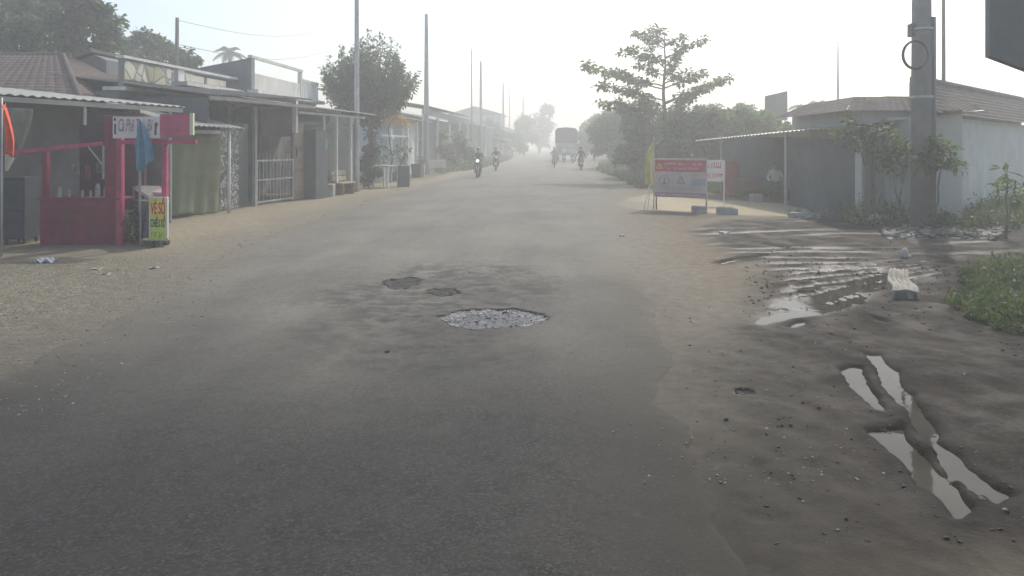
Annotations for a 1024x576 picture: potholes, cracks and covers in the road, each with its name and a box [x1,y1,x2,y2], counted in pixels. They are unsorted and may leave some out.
pothole [430,305,557,332]
pothole [423,288,461,297]
pothole [381,277,423,290]
